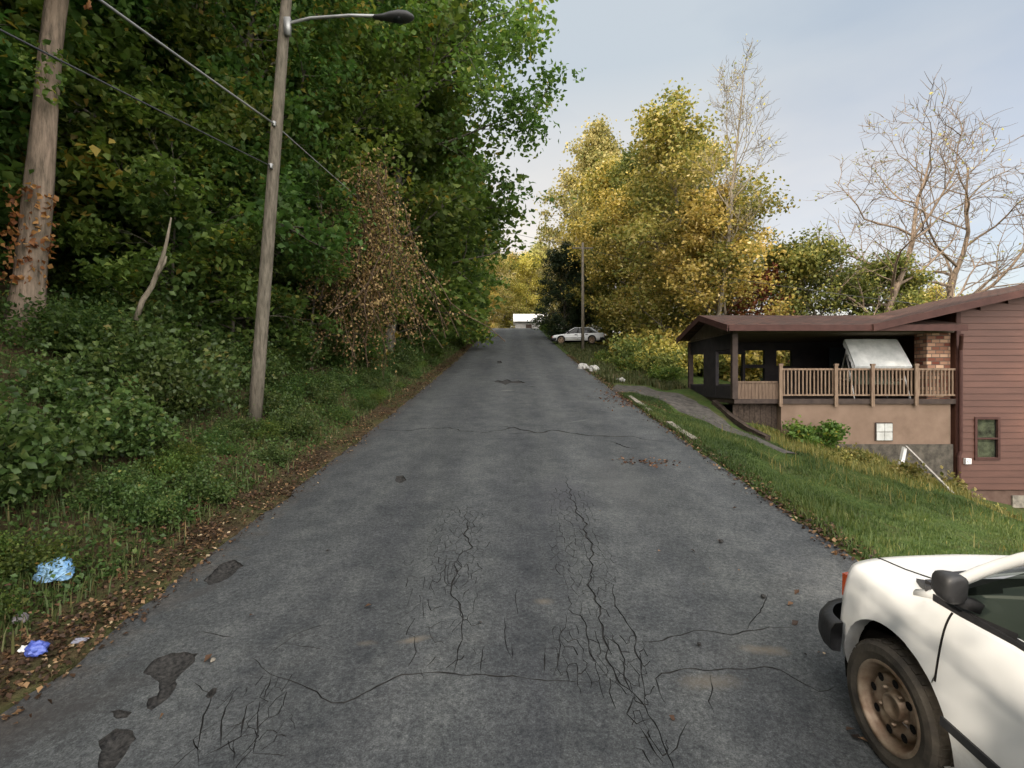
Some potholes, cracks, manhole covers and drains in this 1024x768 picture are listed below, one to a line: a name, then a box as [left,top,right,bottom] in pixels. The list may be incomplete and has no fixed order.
crack [174,476,834,768]
crack [382,426,669,449]
